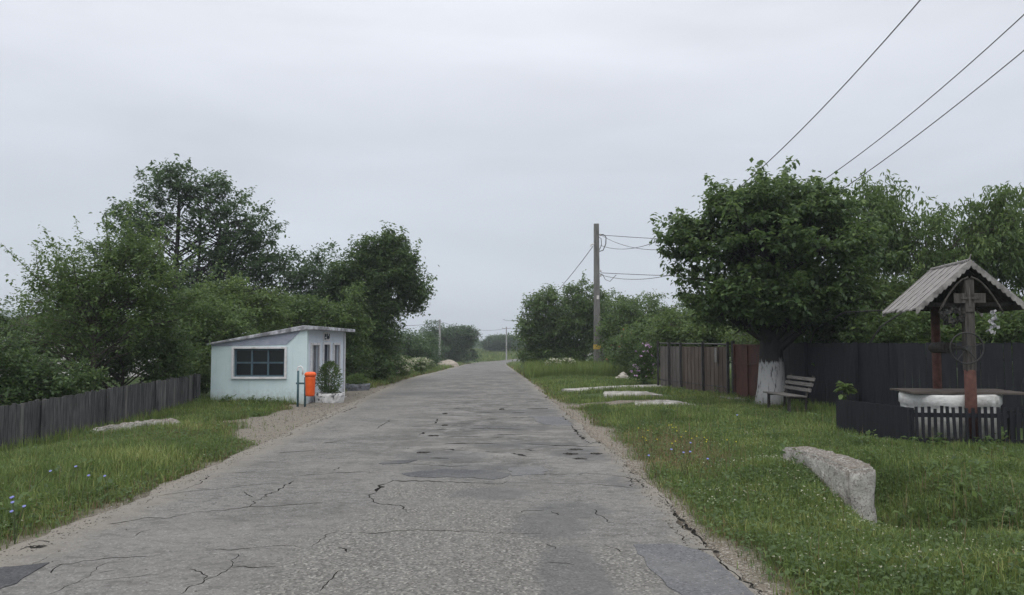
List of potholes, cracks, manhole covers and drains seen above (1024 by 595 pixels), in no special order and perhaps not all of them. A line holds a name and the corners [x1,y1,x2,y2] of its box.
crack [111,467,354,536]
crack [368,401,762,595]
crack [179,530,574,595]
crack [18,540,156,595]
